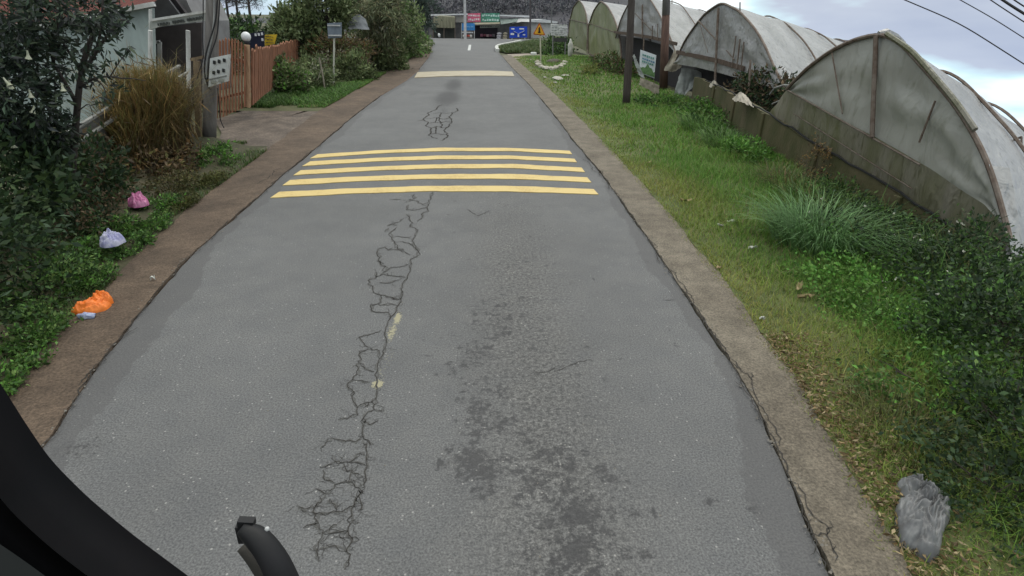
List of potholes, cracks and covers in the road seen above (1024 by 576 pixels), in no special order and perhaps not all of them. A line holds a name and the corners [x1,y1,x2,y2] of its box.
crack [418,105,459,141]
crack [285,192,433,569]
